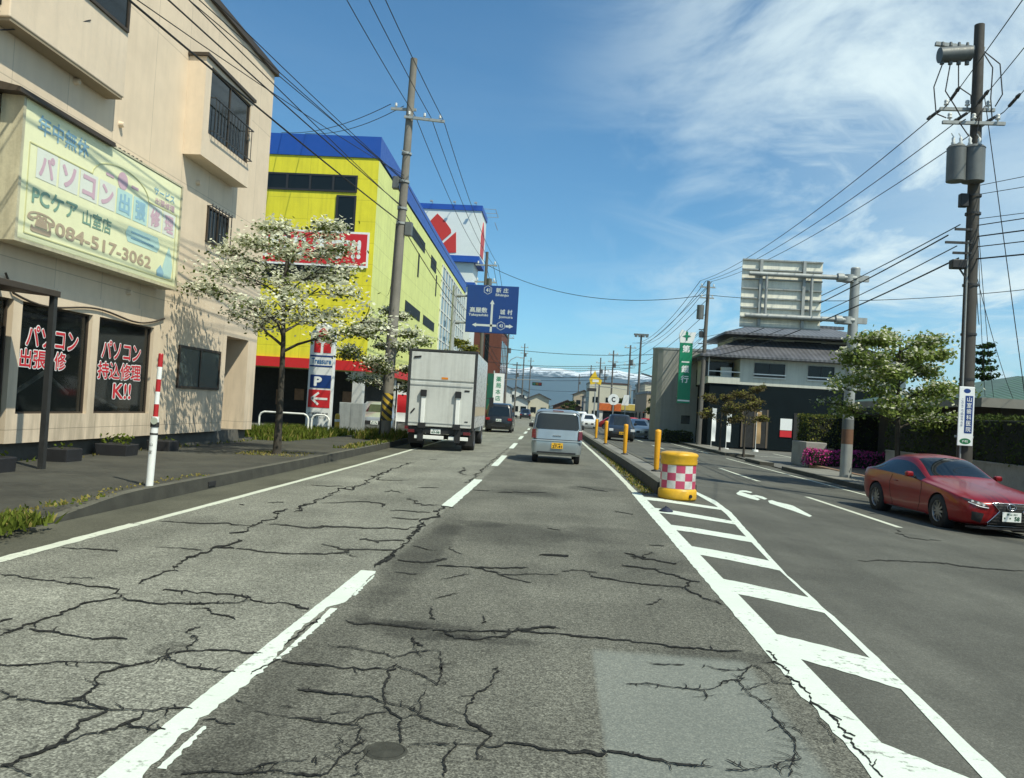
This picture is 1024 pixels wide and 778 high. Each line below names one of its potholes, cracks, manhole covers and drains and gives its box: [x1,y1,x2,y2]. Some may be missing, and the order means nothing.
crack [859,559,1024,571]
crack [0,462,883,777]
manhole cover [363,741,408,761]
